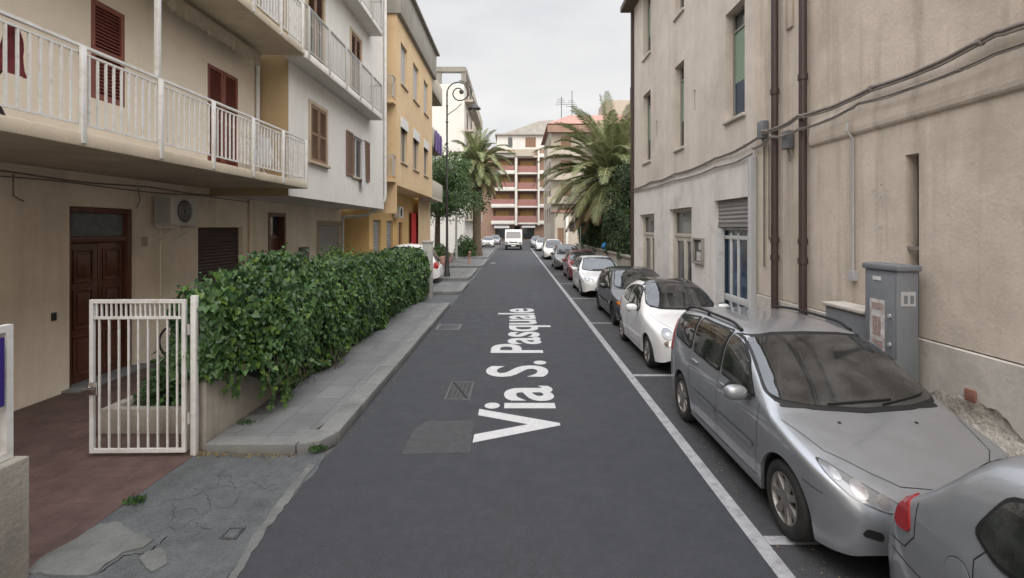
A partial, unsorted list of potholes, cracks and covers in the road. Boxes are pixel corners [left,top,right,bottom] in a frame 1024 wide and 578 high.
crack [94,468,275,576]
manhole cover [219,527,246,540]
